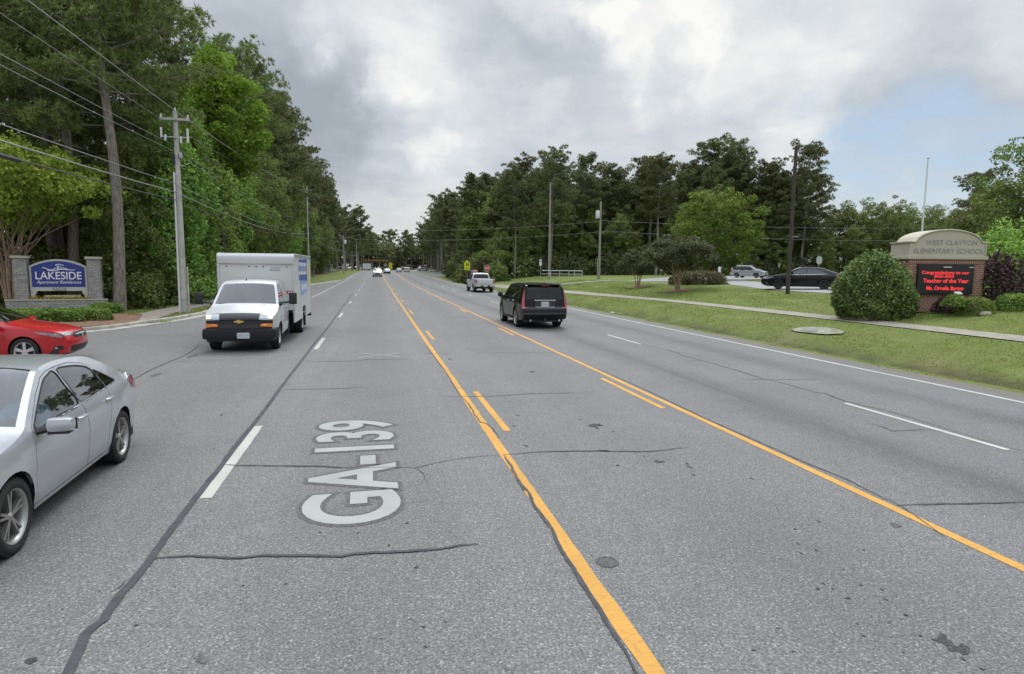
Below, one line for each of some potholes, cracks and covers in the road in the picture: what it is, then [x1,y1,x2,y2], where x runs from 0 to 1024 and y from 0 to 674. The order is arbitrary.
manhole cover [596,556,619,568]
crack [223,392,688,476]
crack [639,343,1023,451]
crack [151,543,478,559]
